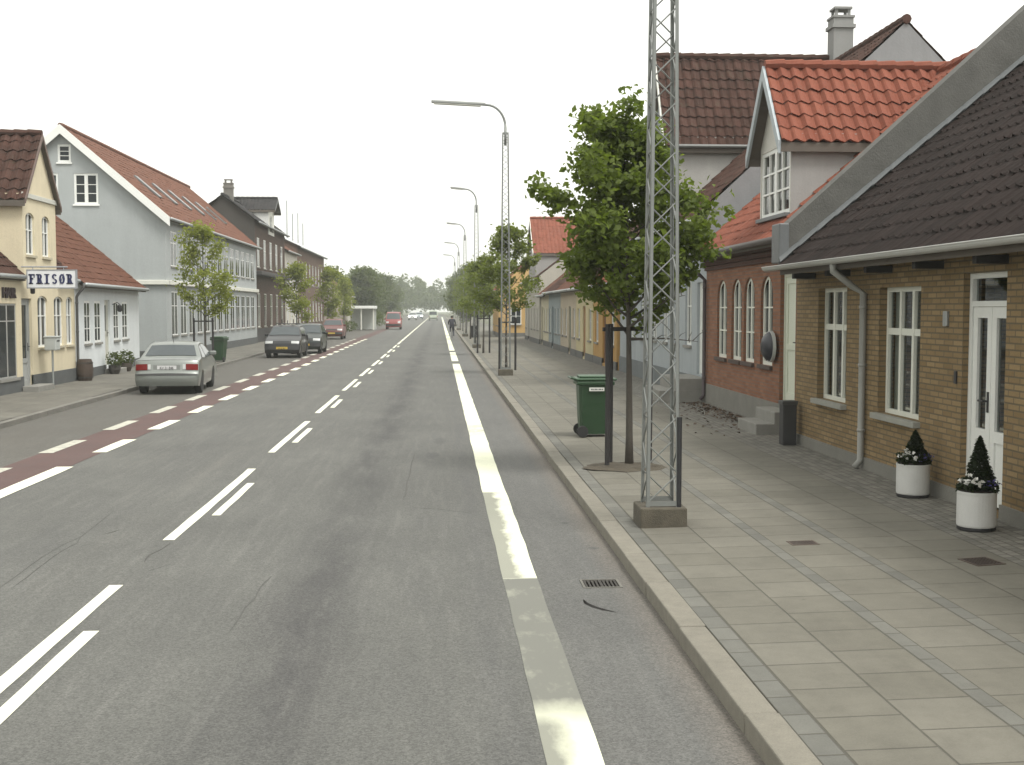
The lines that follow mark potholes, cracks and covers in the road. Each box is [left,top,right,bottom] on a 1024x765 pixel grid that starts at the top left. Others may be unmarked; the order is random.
drain grate [579,579,623,588]
crack [0,513,118,588]
manhole cover [958,557,1006,566]
crack [583,600,613,612]
crack [228,577,271,633]
